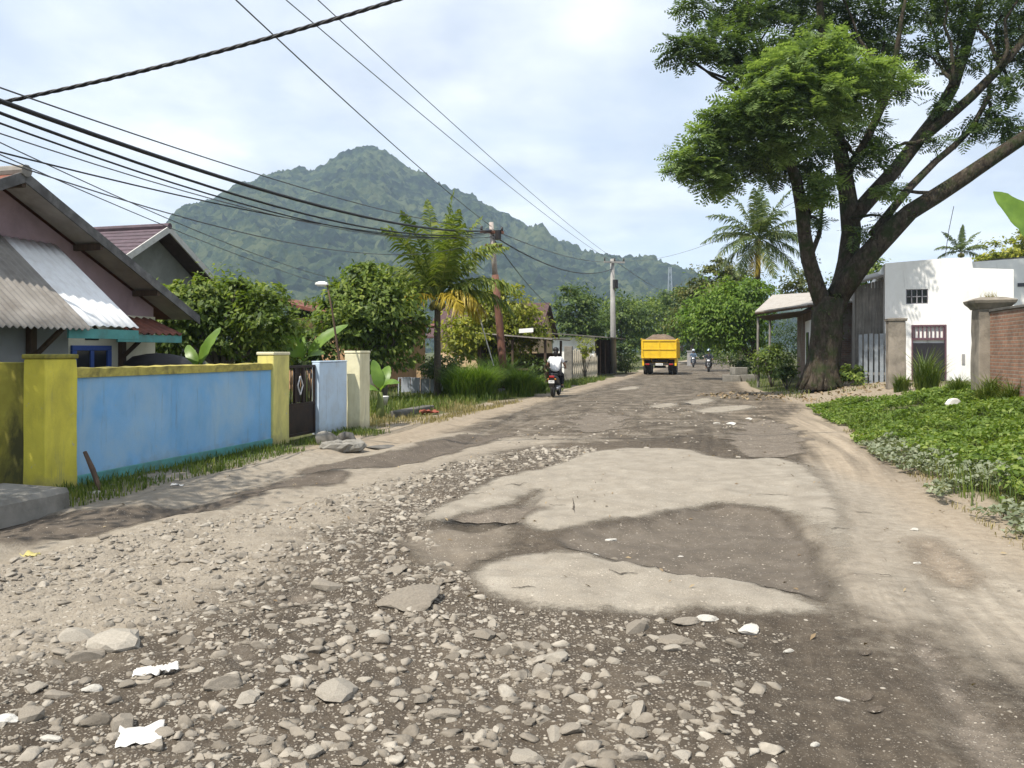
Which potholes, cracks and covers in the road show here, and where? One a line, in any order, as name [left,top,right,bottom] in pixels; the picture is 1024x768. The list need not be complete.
pothole [557,412,635,433]
pothole [397,523,516,573]
pothole [554,504,831,601]
